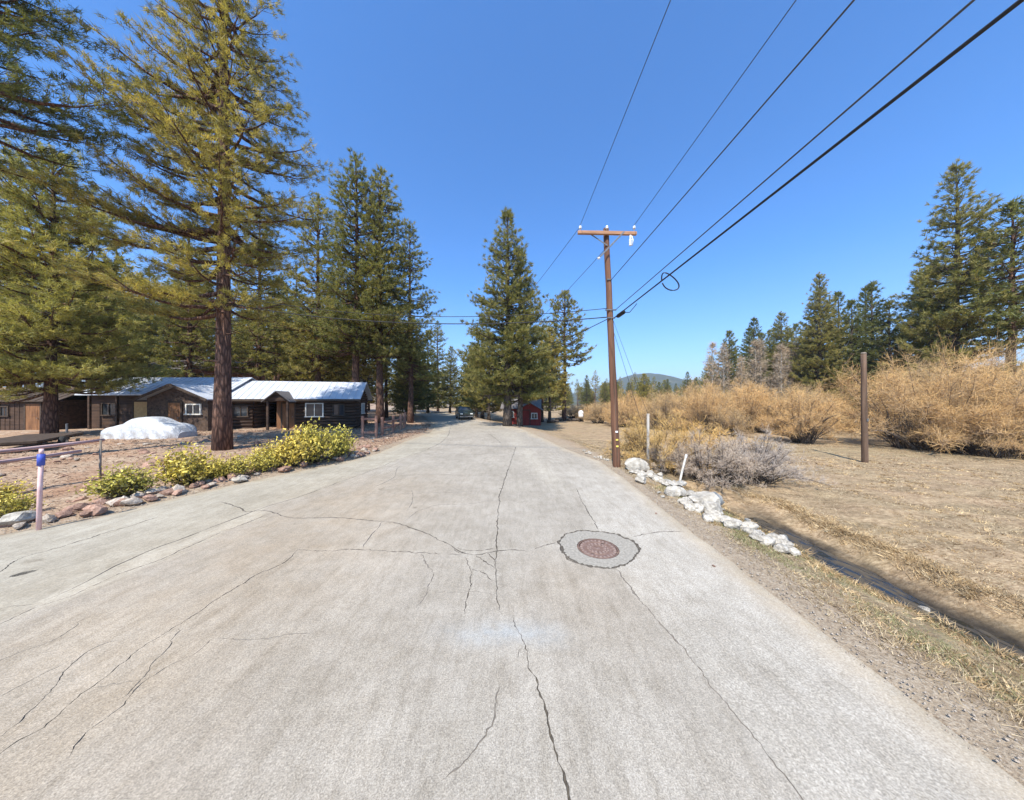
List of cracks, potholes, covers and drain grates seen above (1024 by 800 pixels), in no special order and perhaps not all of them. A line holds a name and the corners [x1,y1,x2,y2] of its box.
crack [0,434,680,800]
manhole cover [560,531,638,568]
